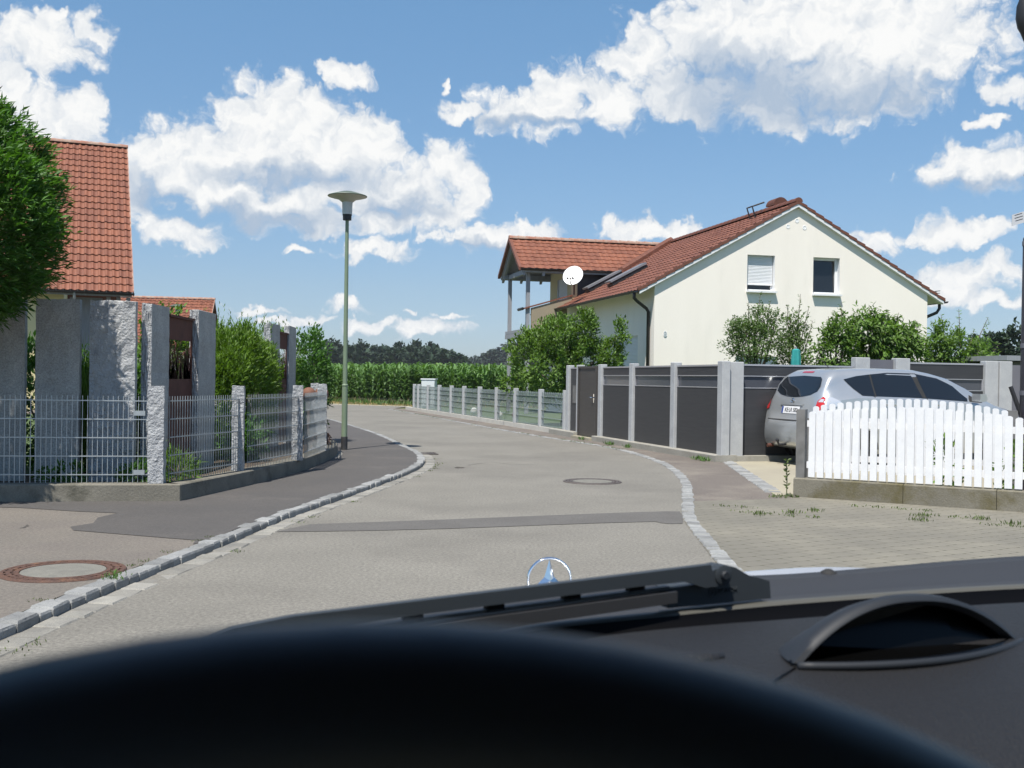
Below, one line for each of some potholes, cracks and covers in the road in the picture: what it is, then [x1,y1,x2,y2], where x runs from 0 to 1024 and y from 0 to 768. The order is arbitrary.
manhole cover [0,560,127,583]
